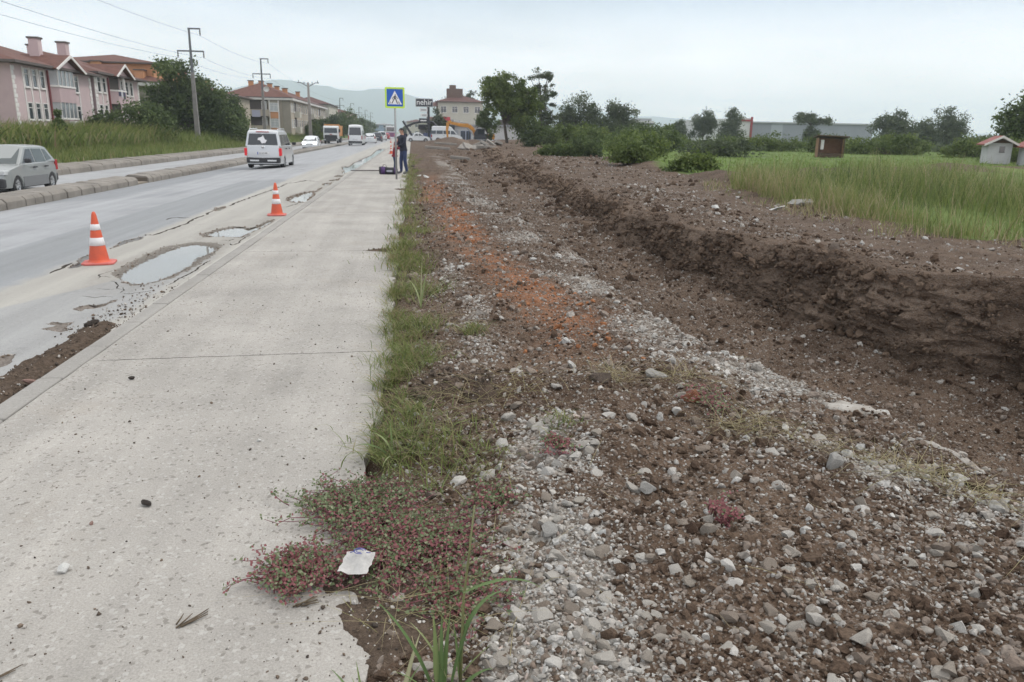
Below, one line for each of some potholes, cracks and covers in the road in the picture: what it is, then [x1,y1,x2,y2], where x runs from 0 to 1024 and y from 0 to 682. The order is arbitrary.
pothole [43,322,73,332]
pothole [286,190,316,203]
pothole [199,219,274,238]
crack [171,235,249,284]
pothole [110,242,224,286]
pothole [73,299,118,311]
pothole [341,149,385,174]
crack [49,169,309,274]
